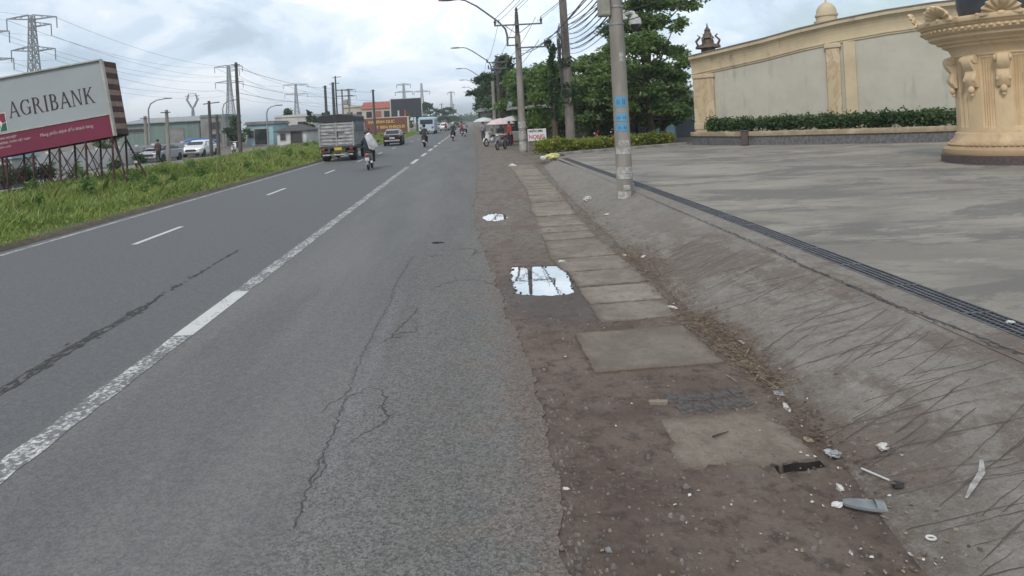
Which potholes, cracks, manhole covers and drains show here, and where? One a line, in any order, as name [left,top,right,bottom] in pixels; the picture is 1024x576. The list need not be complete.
crack [293,248,488,528]
pothole [509,265,575,297]
pothole [482,212,507,221]
pothole [770,461,827,474]
